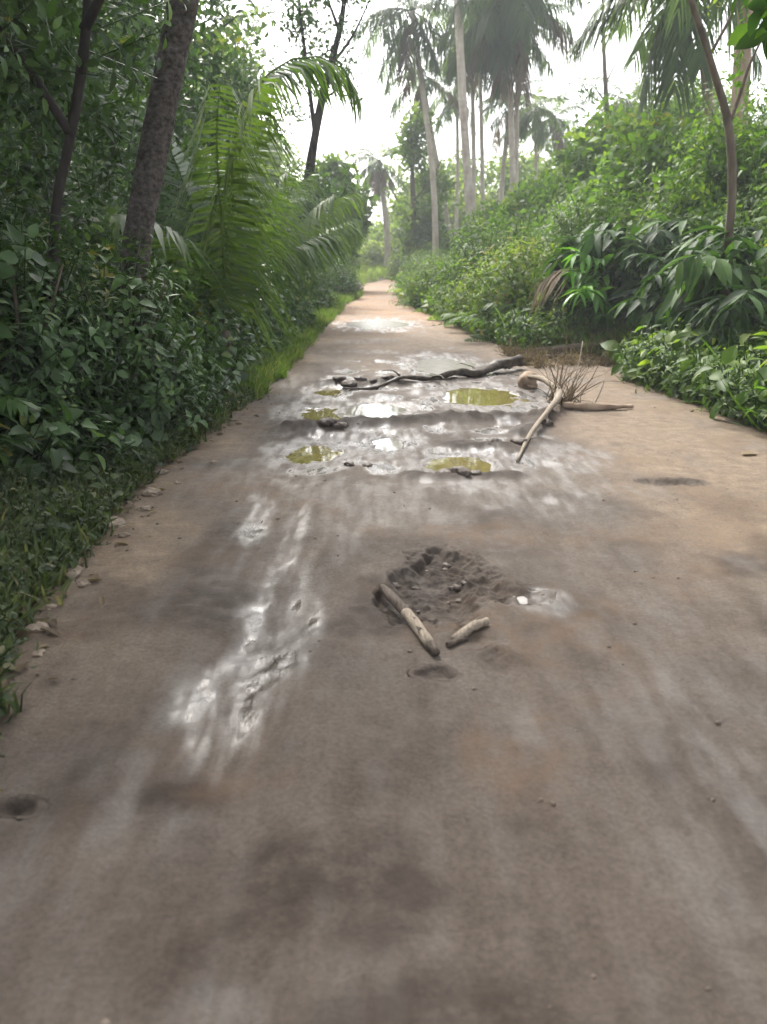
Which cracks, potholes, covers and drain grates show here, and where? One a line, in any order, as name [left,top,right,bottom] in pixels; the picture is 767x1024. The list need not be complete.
pothole [631,477,713,487]
pothole [287,406,350,421]
pothole [279,444,347,465]
pothole [367,542,557,638]
pothole [0,796,48,819]
pothole [429,385,538,410]
pothole [408,664,463,682]
pothole [417,453,499,473]
